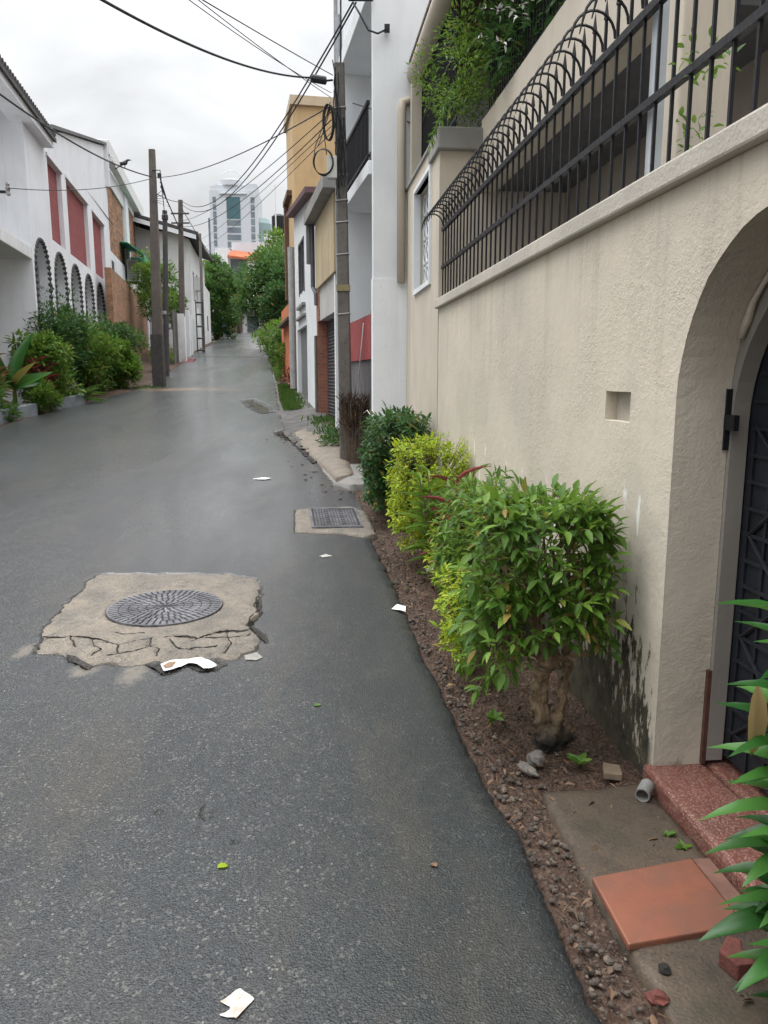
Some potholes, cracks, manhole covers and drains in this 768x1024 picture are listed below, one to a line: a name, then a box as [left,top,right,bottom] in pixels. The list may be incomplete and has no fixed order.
drain grate [309,508,363,529]
crack [43,629,250,656]
manhole cover [106,590,222,627]
